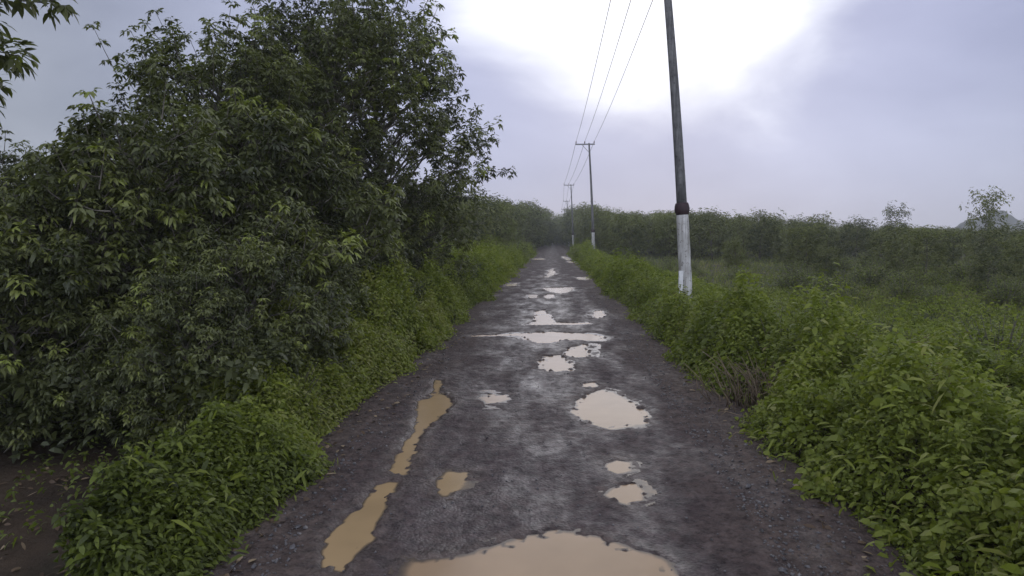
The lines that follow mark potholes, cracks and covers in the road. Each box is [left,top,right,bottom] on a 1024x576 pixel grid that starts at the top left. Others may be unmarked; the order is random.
pothole [585,308,613,320]
pothole [596,478,657,509]
pothole [378,377,463,477]
pothole [428,468,481,501]
pothole [521,309,600,326]
pothole [526,352,589,373]
pothole [551,342,601,359]
pothole [562,387,663,431]
pothole [463,330,615,344]
pothole [307,475,411,576]
pothole [388,520,706,576]
